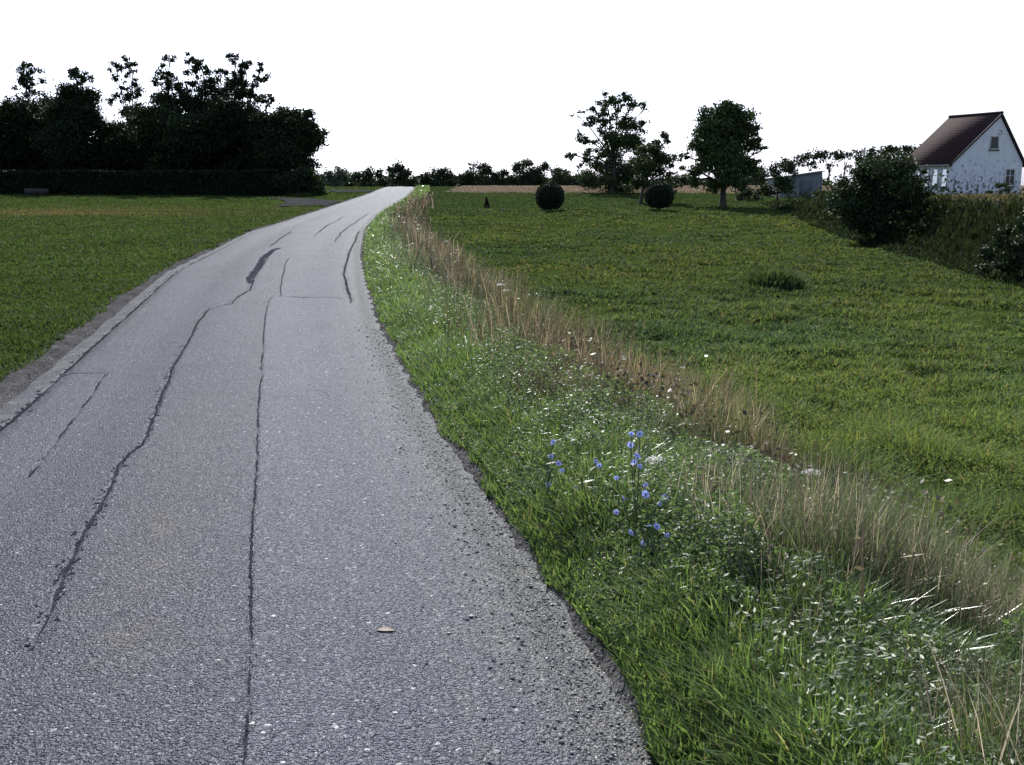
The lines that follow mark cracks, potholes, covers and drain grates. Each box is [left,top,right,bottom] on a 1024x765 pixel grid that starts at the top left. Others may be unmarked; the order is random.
crack [0,231,291,765]
crack [315,214,367,303]
